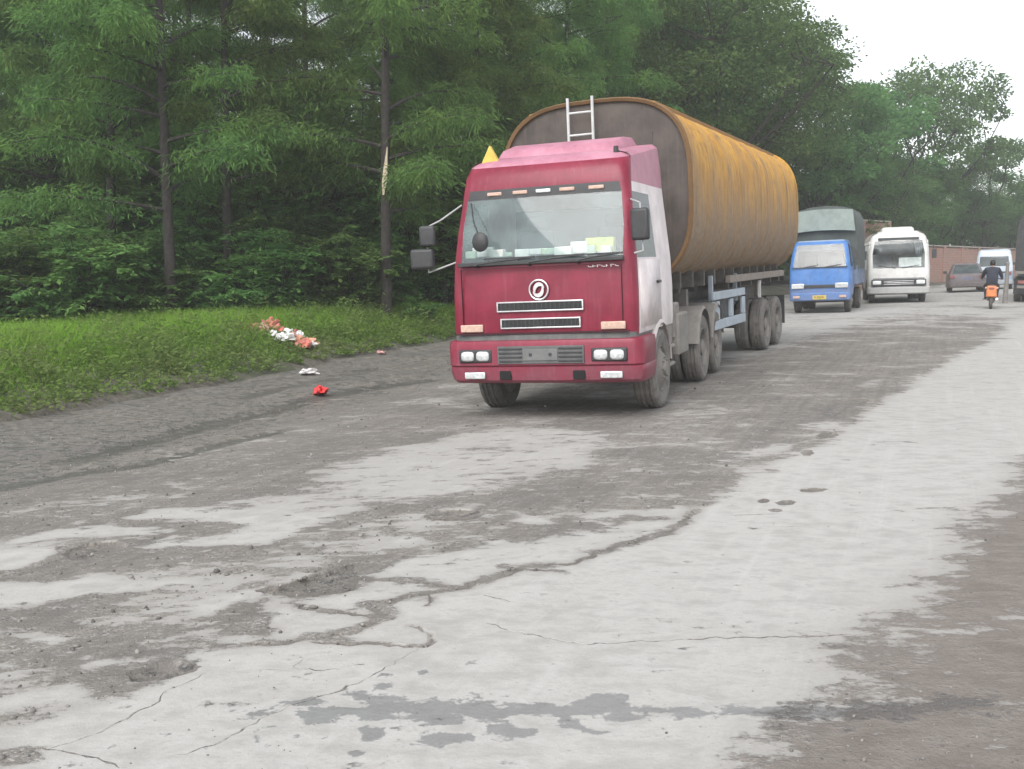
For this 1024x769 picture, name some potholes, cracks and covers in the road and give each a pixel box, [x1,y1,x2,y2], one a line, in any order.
crack [24,511,956,768]
pothole [255,564,359,597]
pothole [123,661,202,682]
